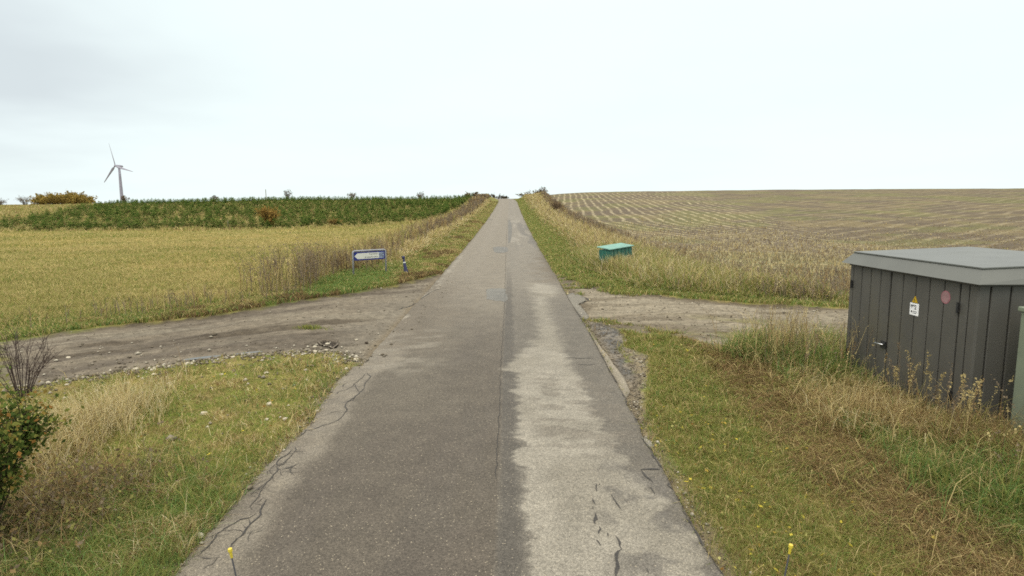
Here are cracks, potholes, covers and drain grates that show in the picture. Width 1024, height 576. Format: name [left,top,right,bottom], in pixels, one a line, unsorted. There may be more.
crack [592,483,649,576]
crack [198,373,378,567]
